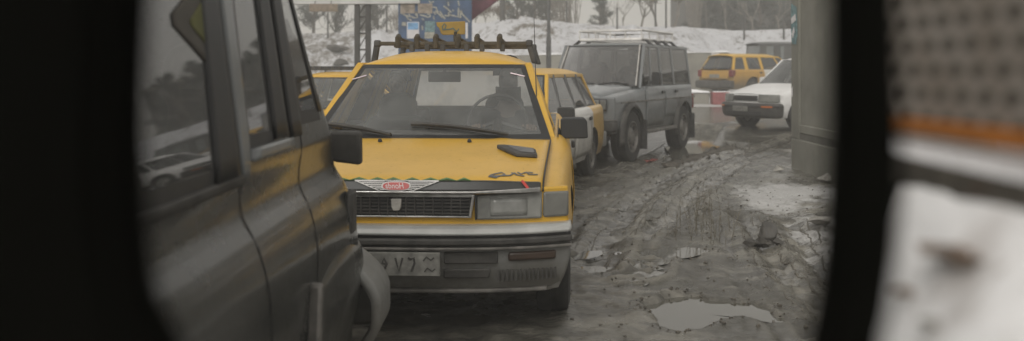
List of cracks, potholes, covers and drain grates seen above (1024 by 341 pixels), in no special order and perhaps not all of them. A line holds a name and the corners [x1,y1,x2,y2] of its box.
pothole [628,286,798,333]
